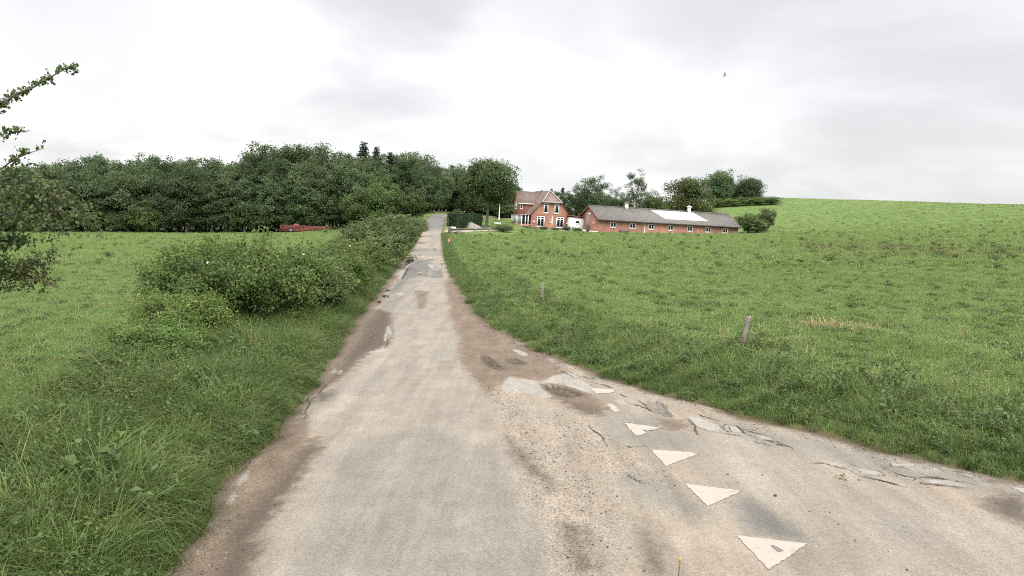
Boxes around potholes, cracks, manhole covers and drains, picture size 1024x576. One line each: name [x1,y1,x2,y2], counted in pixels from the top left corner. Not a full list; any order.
pothole [540,383,589,399]
crack [817,461,976,491]
pothole [481,354,506,371]
crack [687,412,792,448]
crack [561,370,666,417]
